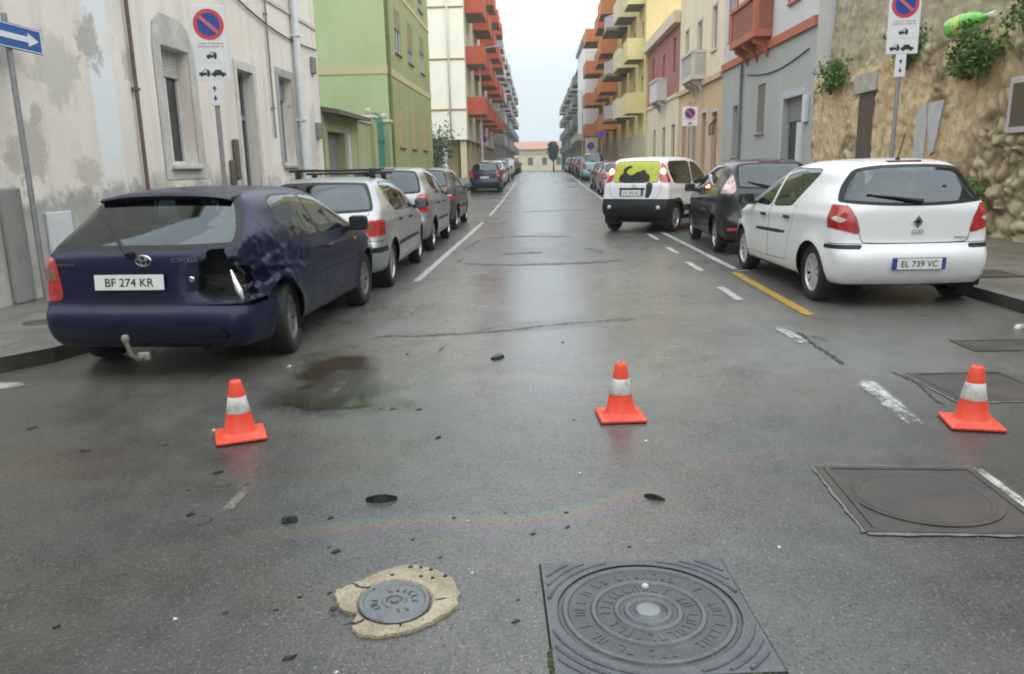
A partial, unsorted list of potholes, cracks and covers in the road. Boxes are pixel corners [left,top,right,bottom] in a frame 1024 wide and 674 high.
manhole cover [539,557,789,674]
manhole cover [904,371,1024,403]
crack [372,318,635,352]
manhole cover [811,464,1024,537]
manhole cover [949,339,1024,352]
crack [798,332,846,365]
manhole cover [329,564,461,639]
